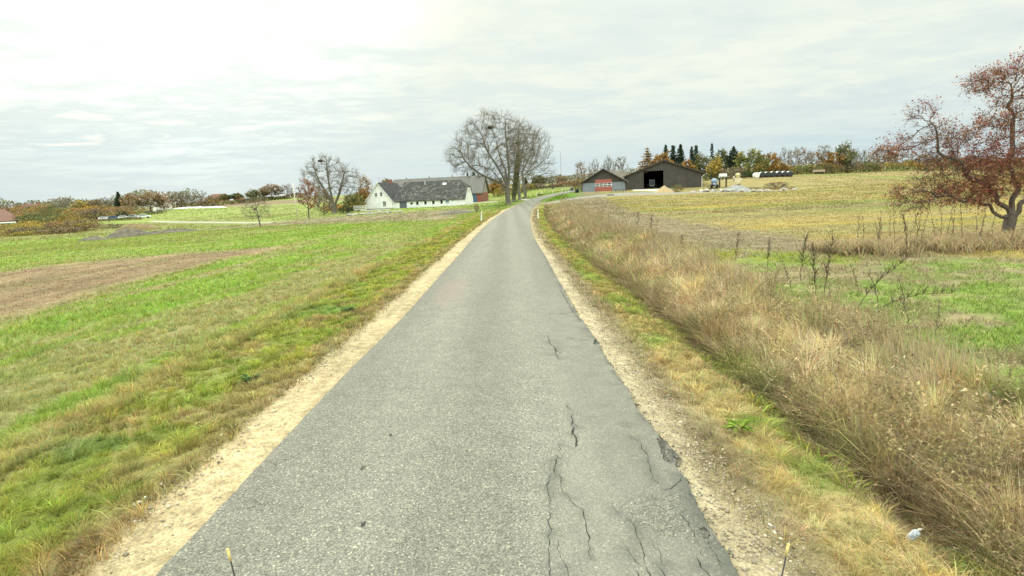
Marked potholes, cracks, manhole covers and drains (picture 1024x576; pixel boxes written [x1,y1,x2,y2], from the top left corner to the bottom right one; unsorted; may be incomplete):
pothole [656,435,678,464]
crack [546,406,591,576]
crack [612,504,665,576]
crack [629,427,727,576]
